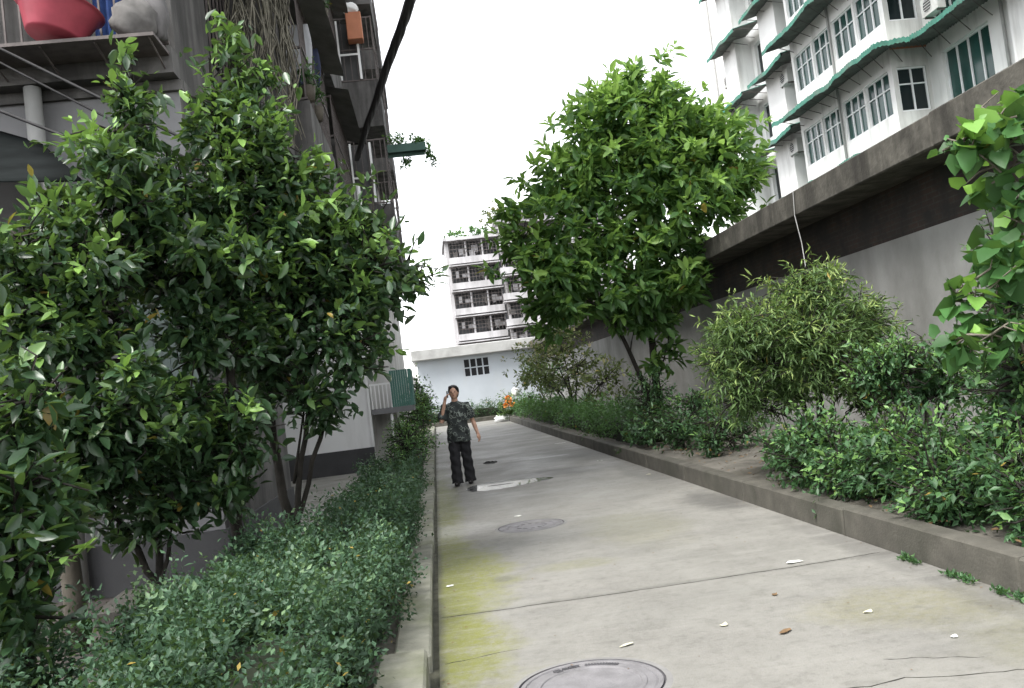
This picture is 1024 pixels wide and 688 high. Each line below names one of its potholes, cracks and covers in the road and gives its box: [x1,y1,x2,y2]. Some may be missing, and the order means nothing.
manhole cover [513,657,673,688]
crack [851,656,1024,688]
manhole cover [495,518,567,533]
